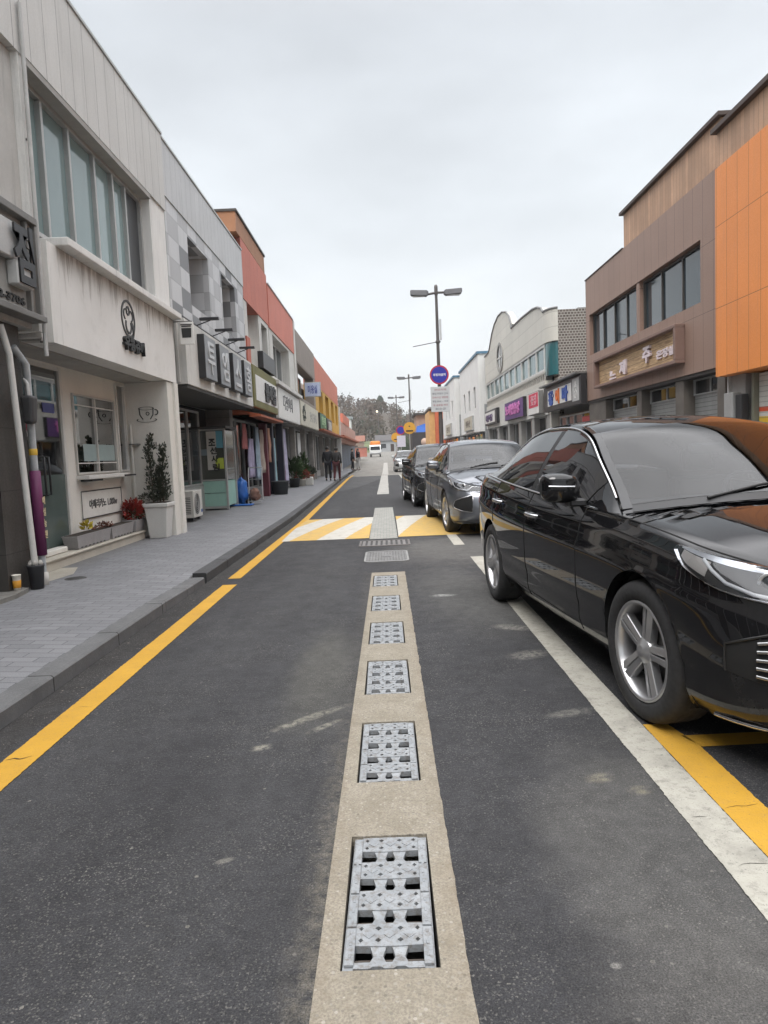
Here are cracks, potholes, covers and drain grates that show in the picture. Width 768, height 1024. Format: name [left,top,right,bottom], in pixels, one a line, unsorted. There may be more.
drain grate [373,575,398,587]
drain grate [342,837,436,971]
drain grate [370,622,404,644]
drain grate [372,595,400,611]
drain grate [366,660,410,695]
manhole cover [364,550,409,563]
drain grate [359,539,411,547]
drain grate [359,722,419,783]
